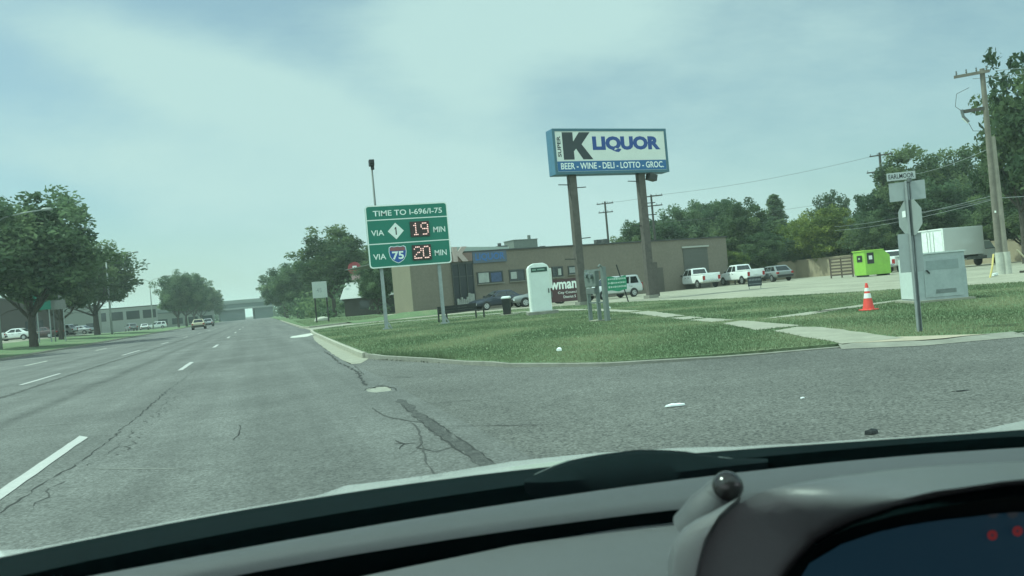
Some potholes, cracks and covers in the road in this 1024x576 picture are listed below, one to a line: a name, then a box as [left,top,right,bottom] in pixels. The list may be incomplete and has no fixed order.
crack [0,370,194,529]
crack [324,351,397,391]
